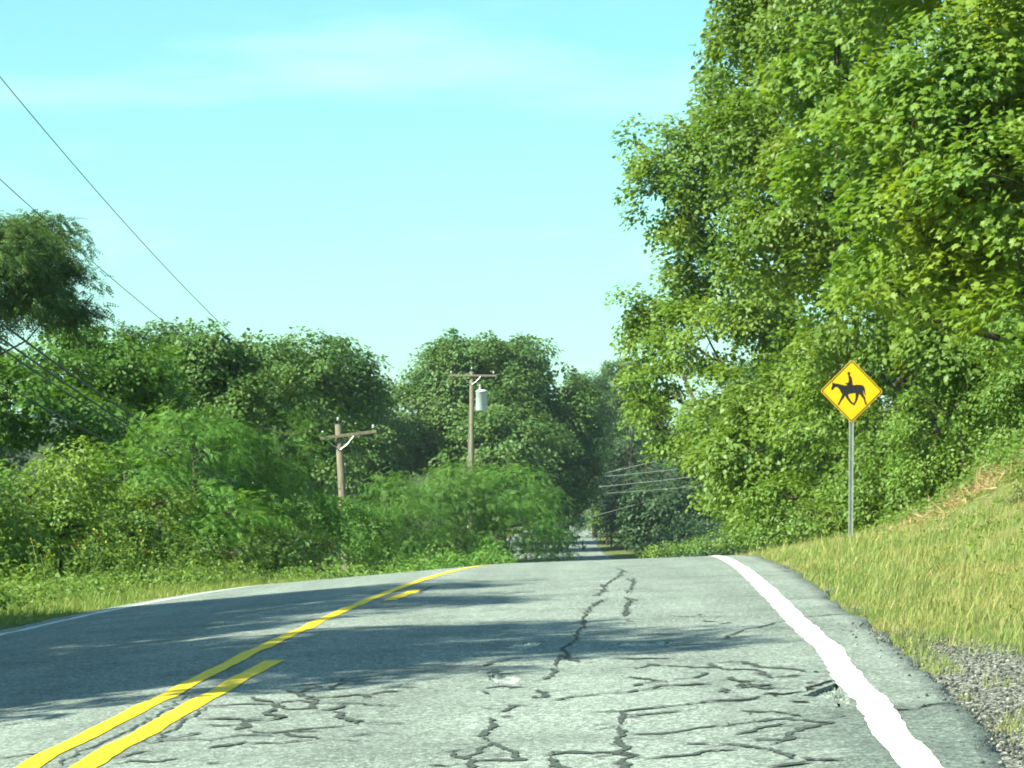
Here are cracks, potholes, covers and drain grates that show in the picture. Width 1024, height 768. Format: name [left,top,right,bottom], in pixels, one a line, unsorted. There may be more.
pothole [776,681,856,710]
crack [619,643,678,659]
crack [719,671,837,702]
crack [469,568,638,716]
pothole [464,673,543,686]
